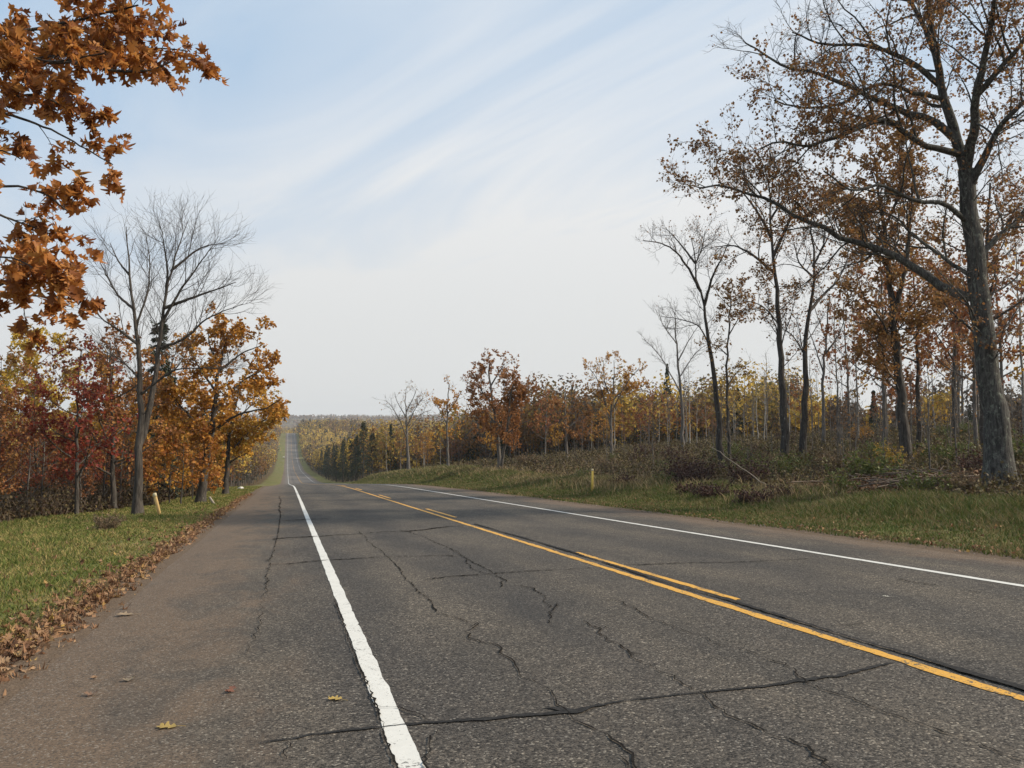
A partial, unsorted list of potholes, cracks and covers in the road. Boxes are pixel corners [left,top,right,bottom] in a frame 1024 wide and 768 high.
crack [275,518,637,768]
